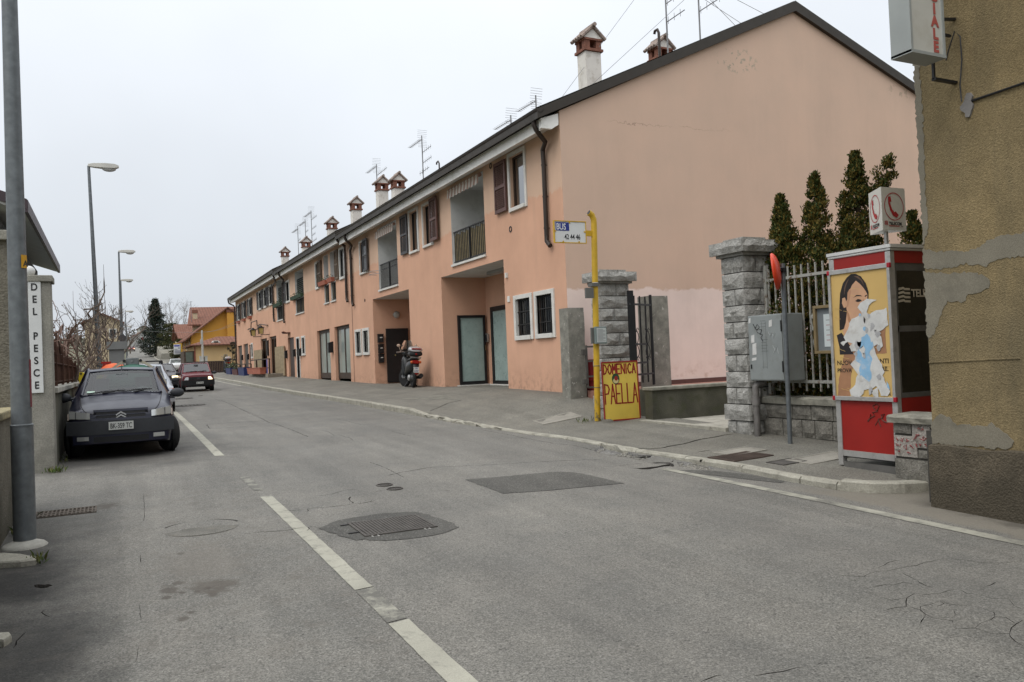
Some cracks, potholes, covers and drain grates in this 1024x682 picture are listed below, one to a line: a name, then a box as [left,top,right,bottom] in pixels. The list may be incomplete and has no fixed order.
manhole cover [766,458,807,466]
manhole cover [707,451,774,462]
crack [843,559,1023,646]
manhole cover [164,519,239,537]
crack [244,434,730,534]
